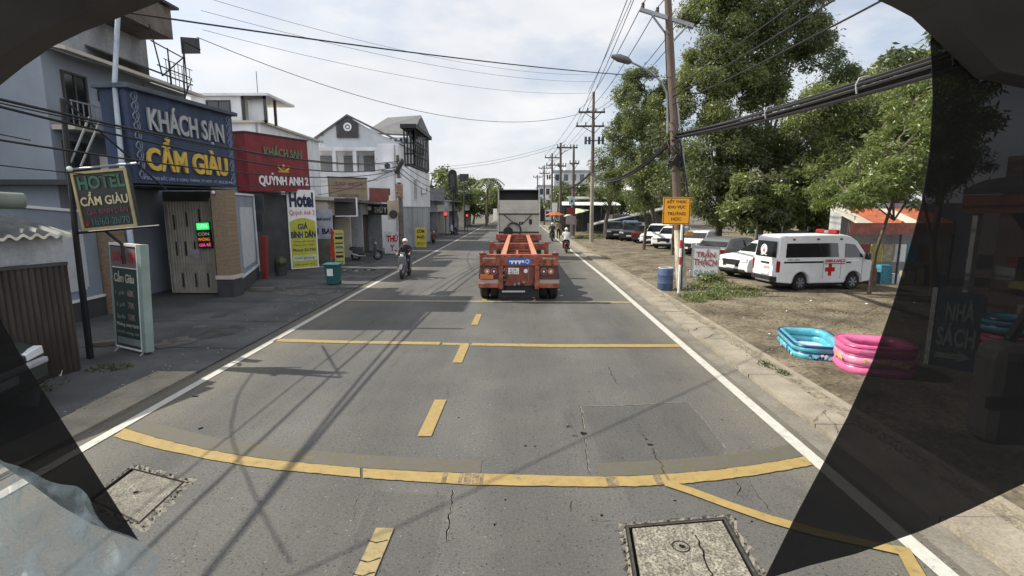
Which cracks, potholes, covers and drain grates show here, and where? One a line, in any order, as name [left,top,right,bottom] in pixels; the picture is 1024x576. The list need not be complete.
crack [579,404,591,473]
manhole cover [618,513,768,576]
manhole cover [105,464,197,532]
crack [695,536,714,576]
